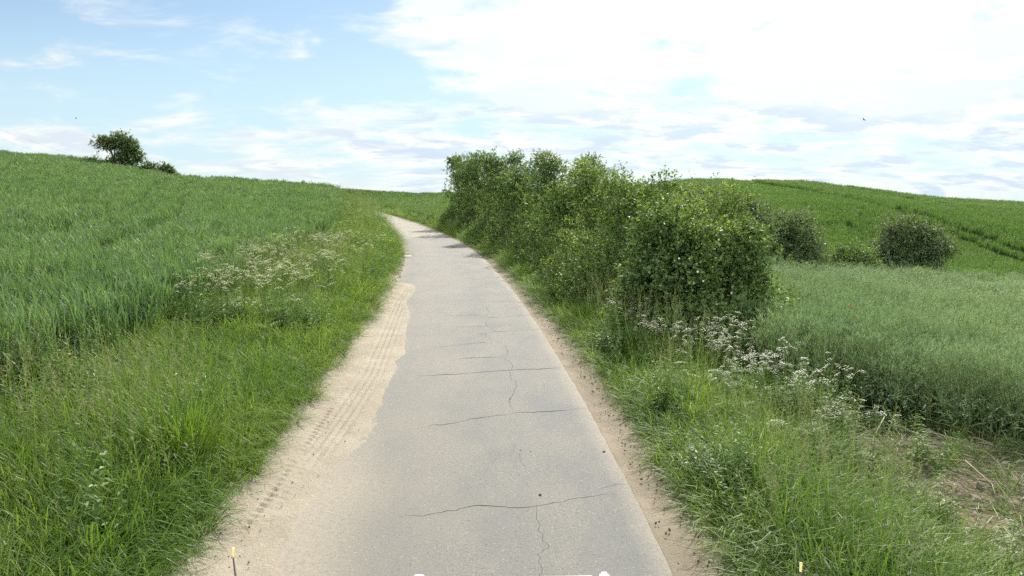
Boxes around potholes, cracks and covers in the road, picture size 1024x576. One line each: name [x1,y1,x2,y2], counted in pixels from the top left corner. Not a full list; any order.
crack [422,301,575,428]
crack [406,484,618,576]
